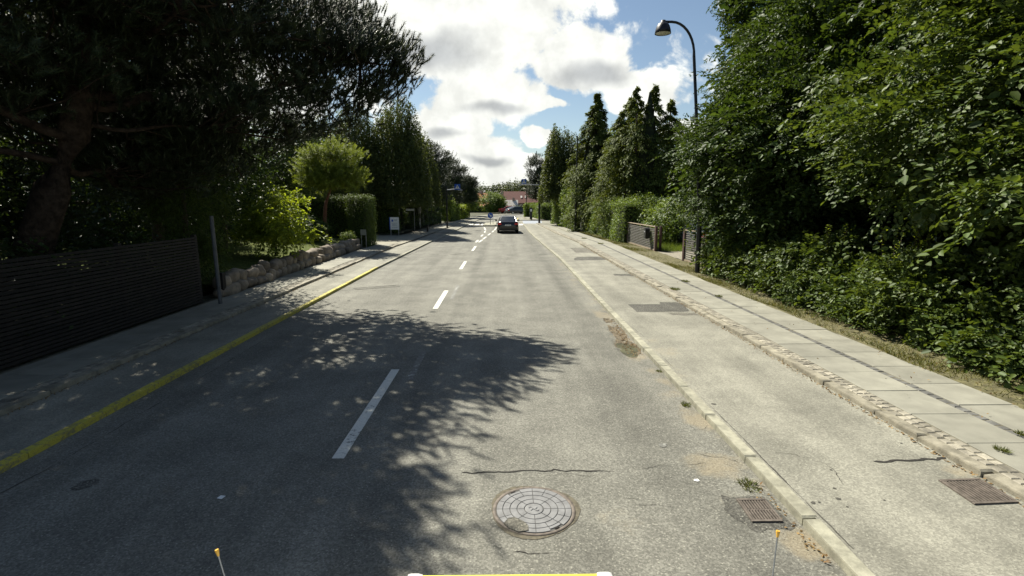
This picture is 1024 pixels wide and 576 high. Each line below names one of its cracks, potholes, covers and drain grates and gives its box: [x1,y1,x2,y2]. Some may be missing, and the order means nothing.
manhole cover [491,486,581,539]
crack [875,455,946,463]
drain grate [938,478,1019,505]
crack [462,454,732,476]
drain grate [736,498,783,522]
